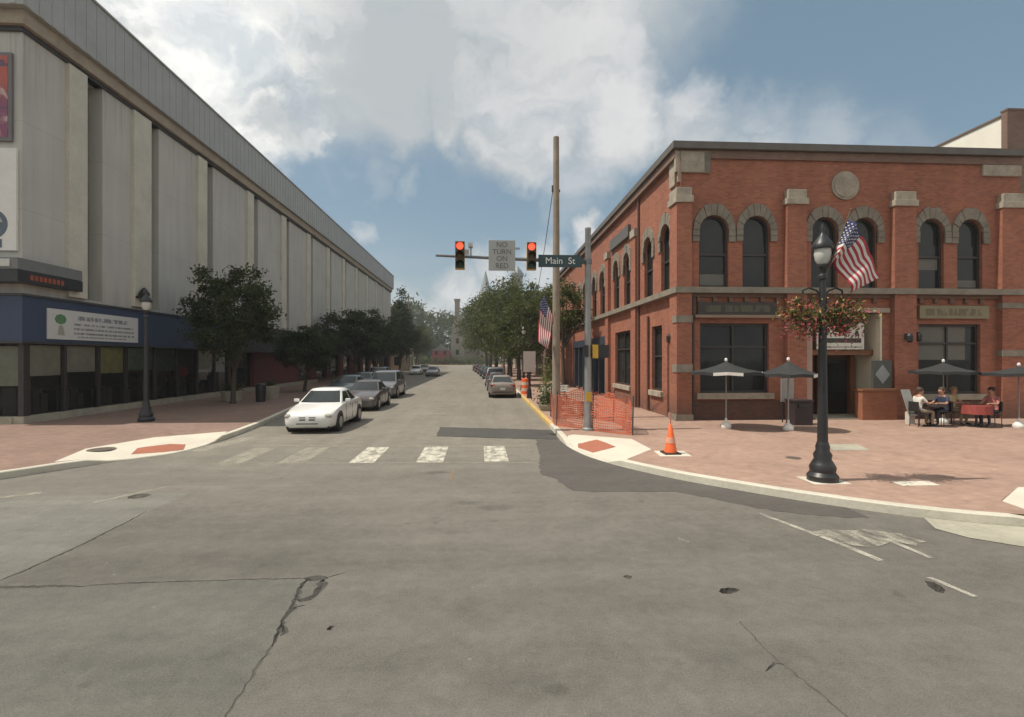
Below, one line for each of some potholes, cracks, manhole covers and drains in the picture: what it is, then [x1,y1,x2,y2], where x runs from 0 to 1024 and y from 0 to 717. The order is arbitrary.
crack [740,622,848,717]
crack [0,513,342,717]
pothole [925,581,945,593]
